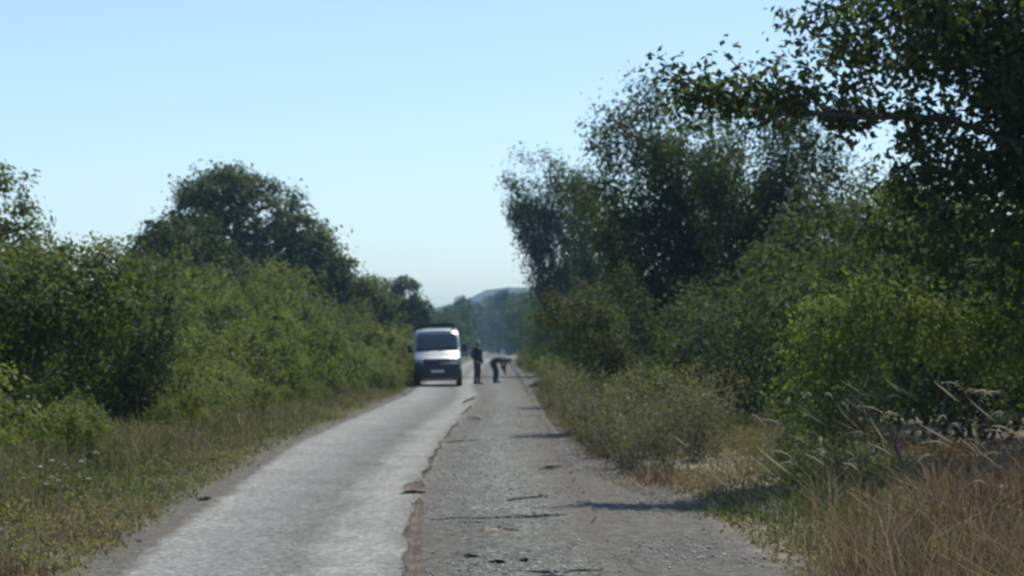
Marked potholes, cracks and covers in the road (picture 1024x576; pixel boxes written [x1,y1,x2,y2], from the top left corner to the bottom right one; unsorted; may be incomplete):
crack [400,397,567,576]
pothole [403,481,425,493]
